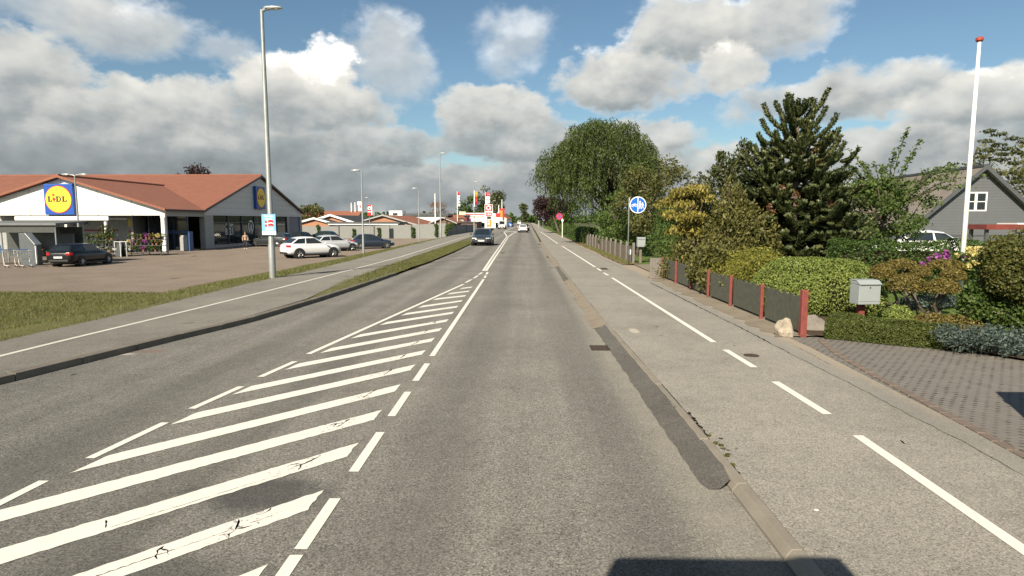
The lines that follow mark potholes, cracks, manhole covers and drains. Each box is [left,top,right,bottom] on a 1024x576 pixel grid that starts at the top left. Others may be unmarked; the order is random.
crack [96,508,278,576]
crack [105,457,318,528]
